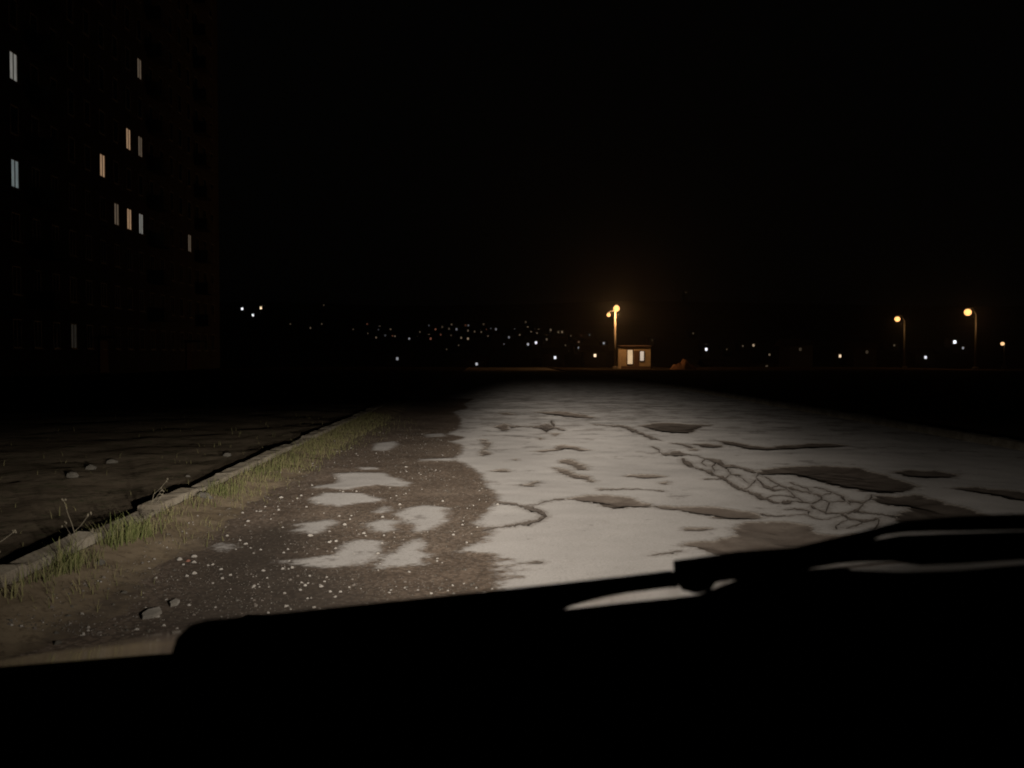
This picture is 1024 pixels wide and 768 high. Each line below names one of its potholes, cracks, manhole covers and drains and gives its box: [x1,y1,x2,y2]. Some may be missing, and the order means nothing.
pothole [682,521,852,554]
pothole [566,495,659,509]
pothole [891,469,959,478]
crack [483,499,564,531]
pothole [756,465,920,493]
crack [594,424,895,530]
crack [509,420,565,433]
pothole [639,422,711,434]
pothole [952,487,1024,501]
